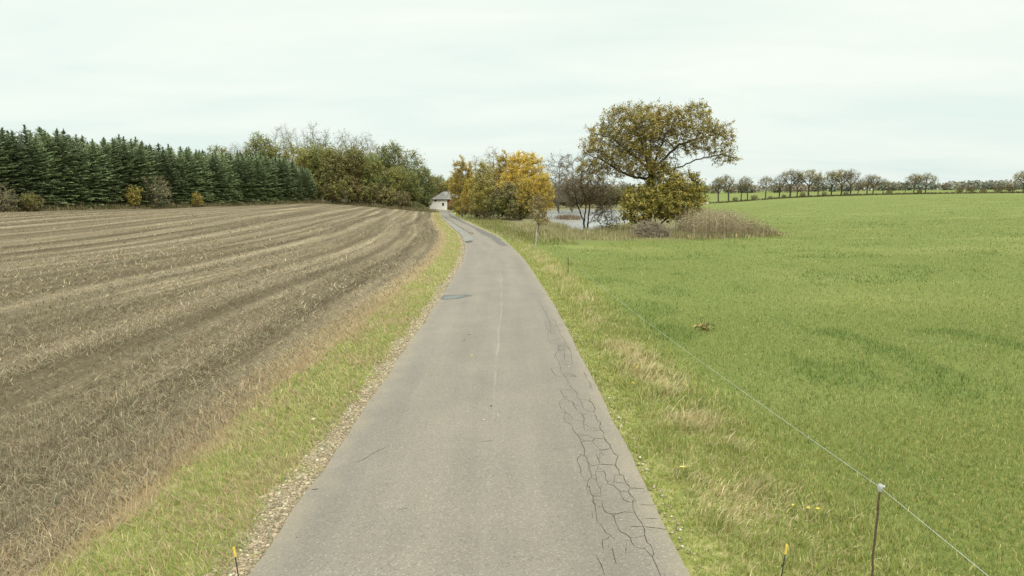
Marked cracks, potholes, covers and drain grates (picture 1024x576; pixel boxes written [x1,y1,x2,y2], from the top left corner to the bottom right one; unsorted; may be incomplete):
crack [541,305,665,576]
